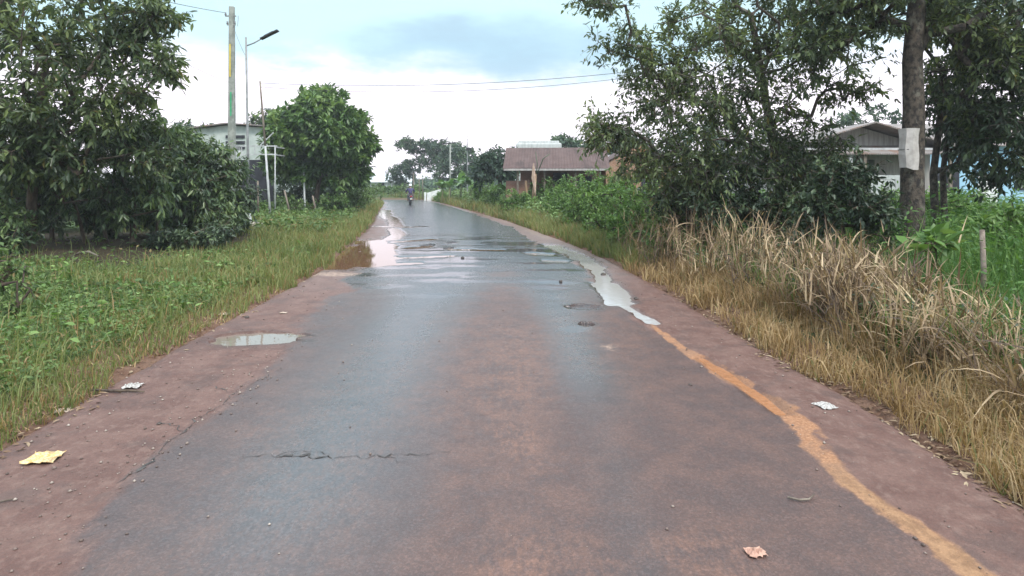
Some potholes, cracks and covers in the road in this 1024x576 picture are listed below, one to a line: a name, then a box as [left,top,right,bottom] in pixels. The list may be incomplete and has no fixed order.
crack [246,450,445,462]
pothole [558,303,613,311]
pothole [194,329,328,349]
pothole [574,320,600,328]
crack [117,367,282,483]
